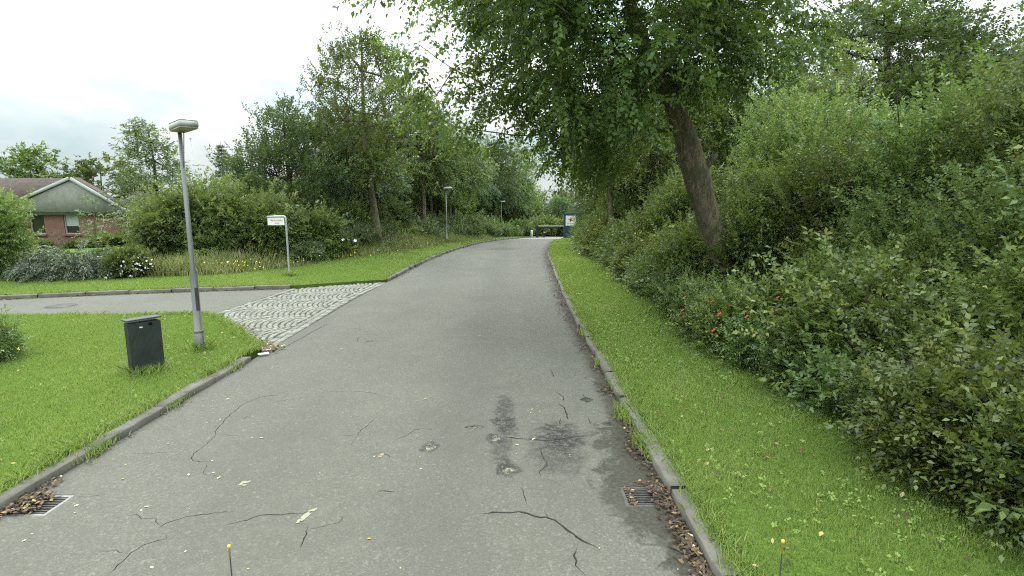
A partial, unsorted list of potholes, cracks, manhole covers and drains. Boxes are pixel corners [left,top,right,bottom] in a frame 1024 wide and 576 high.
crack [483,371,600,575]
drain grate [619,487,666,506]
drain grate [0,495,74,516]
crack [191,395,289,477]
crack [108,511,343,573]
